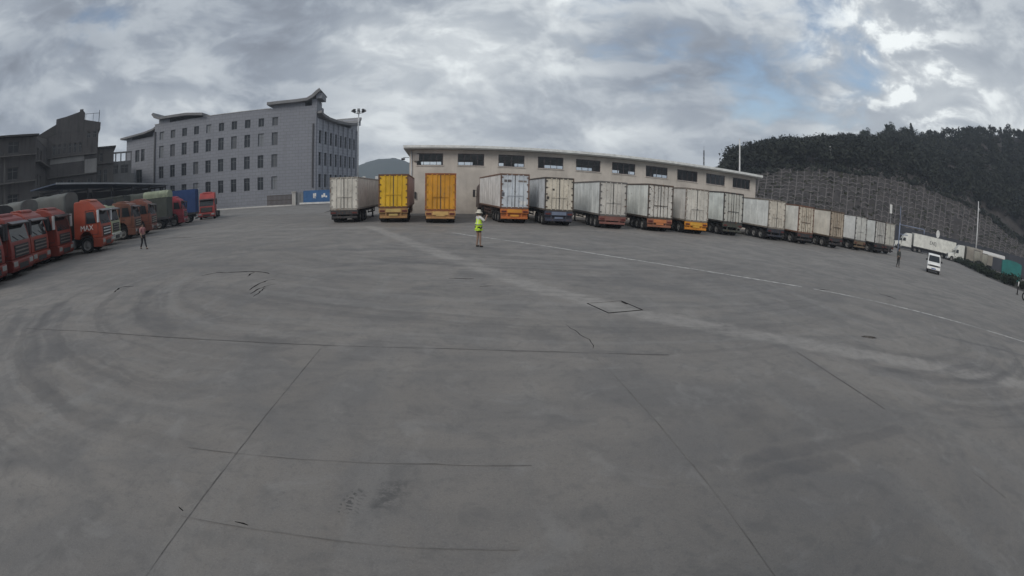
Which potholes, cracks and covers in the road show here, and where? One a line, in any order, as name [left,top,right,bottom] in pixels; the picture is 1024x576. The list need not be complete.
crack [203,271,275,297]
manhole cover [587,301,642,313]
